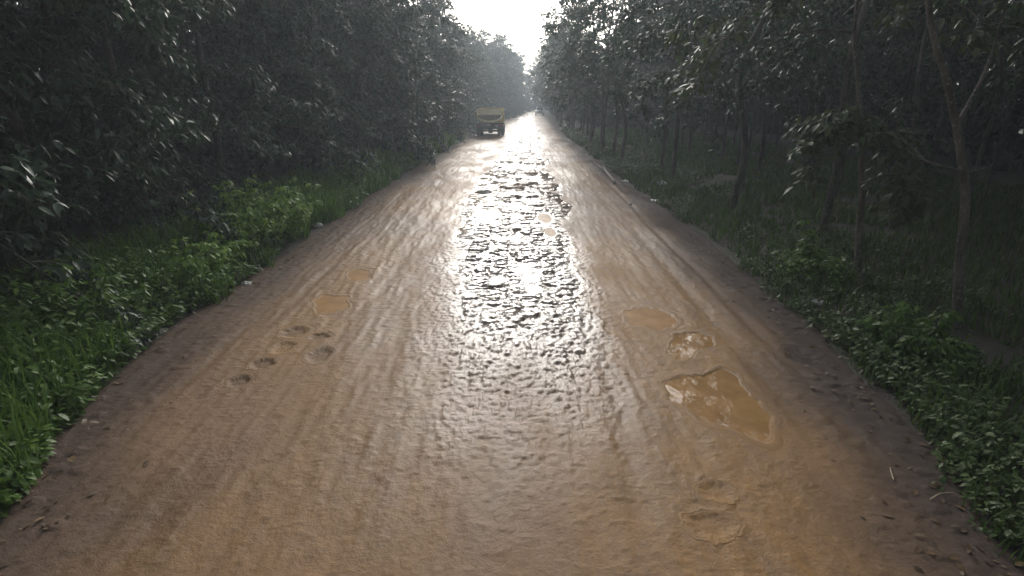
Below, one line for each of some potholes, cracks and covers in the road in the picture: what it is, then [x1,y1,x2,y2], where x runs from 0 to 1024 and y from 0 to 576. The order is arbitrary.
pothole [310,293,353,315]
pothole [246,356,279,371]
pothole [618,304,684,333]
pothole [223,373,255,389]
pothole [345,268,373,281]
pothole [655,363,784,451]
pothole [678,507,748,547]
pothole [300,343,338,365]
pothole [266,339,300,356]
